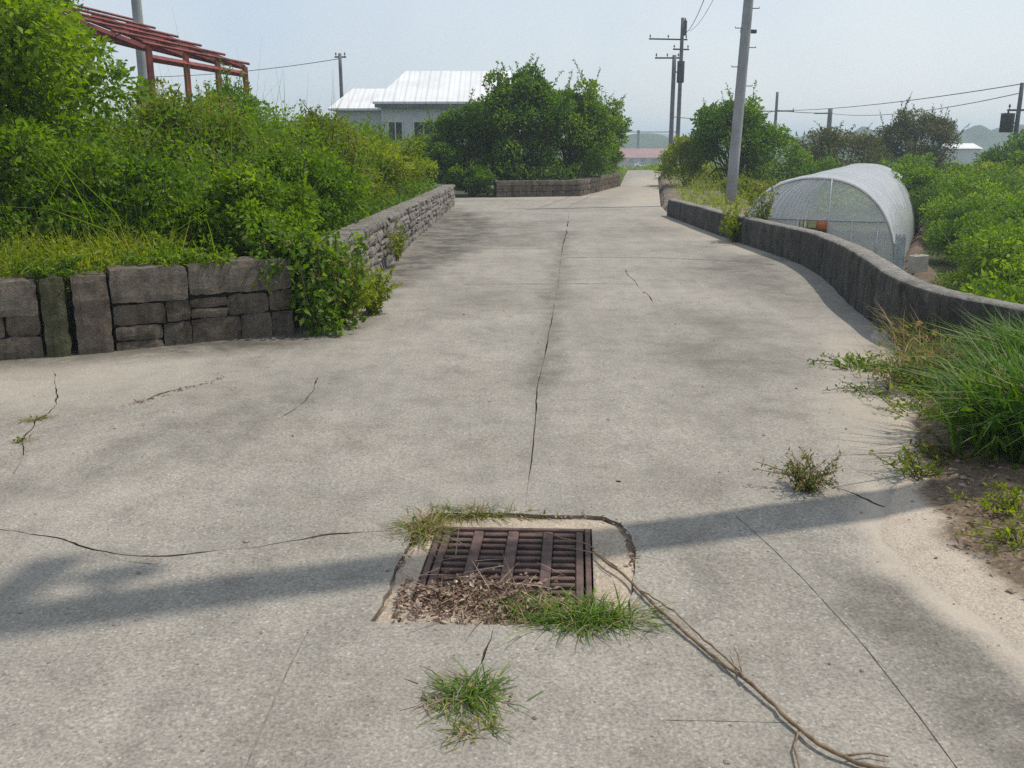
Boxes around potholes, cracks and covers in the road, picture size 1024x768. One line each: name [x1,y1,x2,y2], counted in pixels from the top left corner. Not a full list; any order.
drain grate [371,513,636,626]
crack [12,373,59,476]
crack [832,487,885,507]
crack [0,527,399,565]
crack [525,203,592,508]
